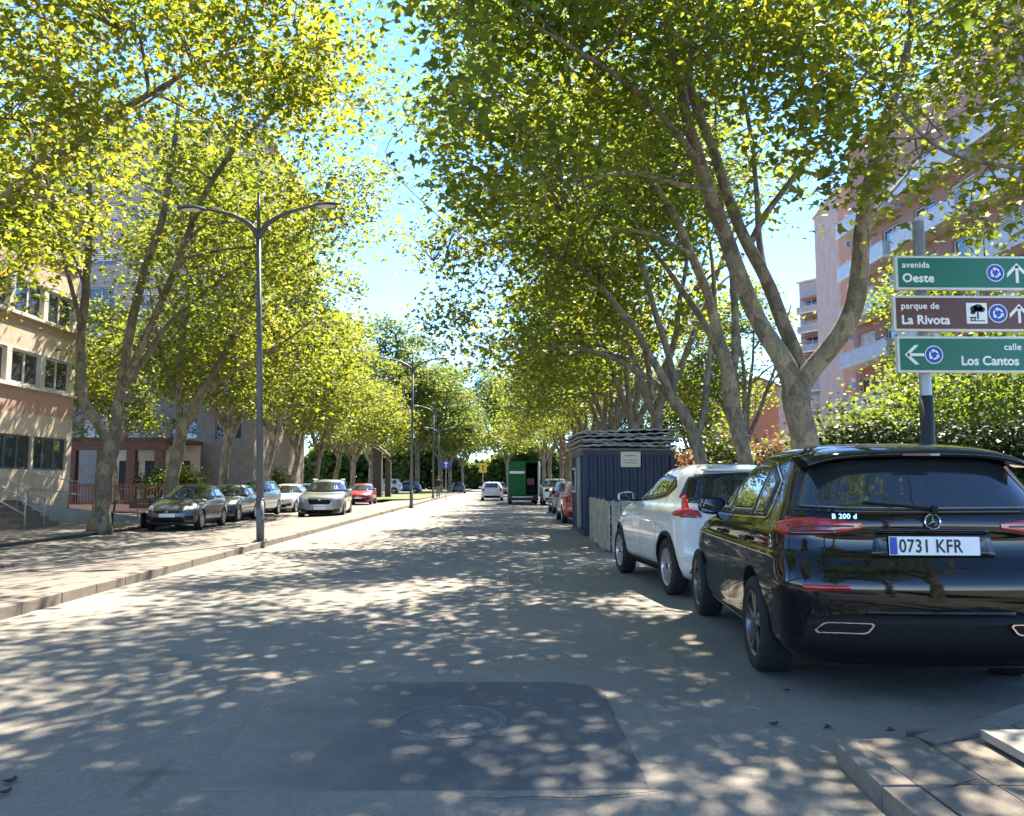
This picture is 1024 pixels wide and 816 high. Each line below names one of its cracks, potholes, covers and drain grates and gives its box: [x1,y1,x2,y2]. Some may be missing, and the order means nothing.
manhole cover [390,705,507,739]
